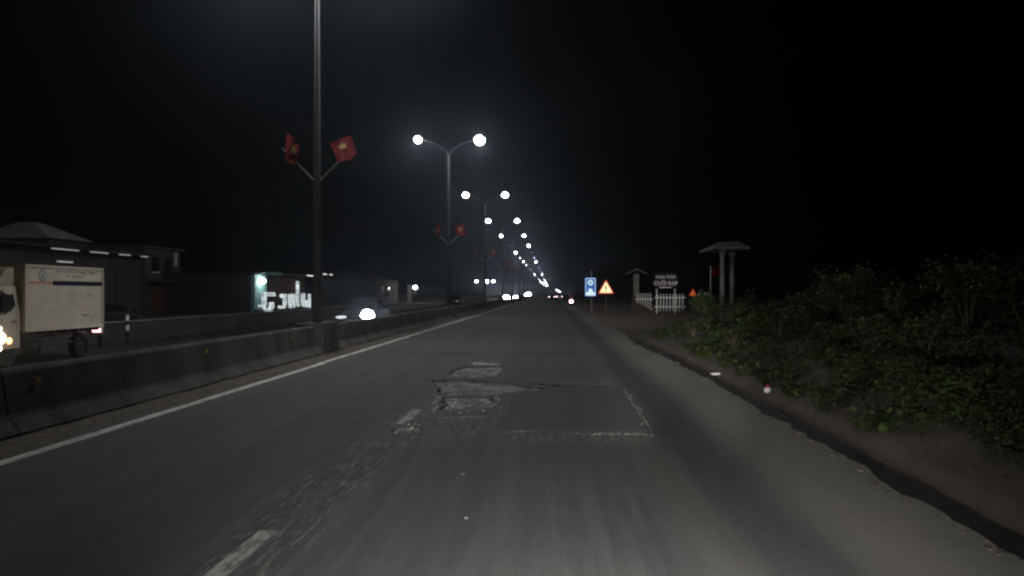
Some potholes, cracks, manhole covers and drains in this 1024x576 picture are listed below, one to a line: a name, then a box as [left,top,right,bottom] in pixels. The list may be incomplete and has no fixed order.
pothole [391,424,435,433]
crack [399,389,654,436]
pothole [433,393,500,413]
pothole [426,378,555,395]
pothole [448,365,507,378]
